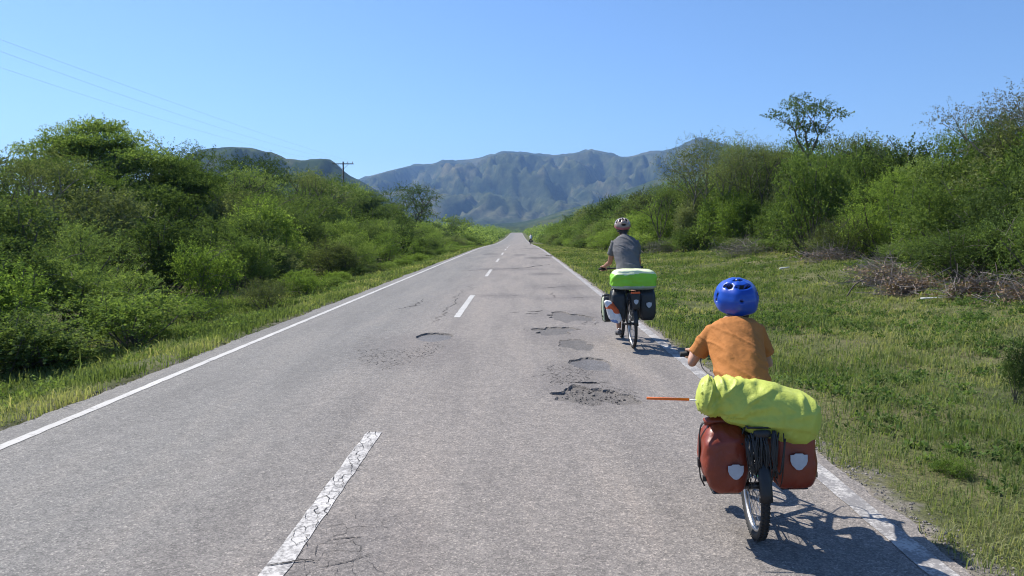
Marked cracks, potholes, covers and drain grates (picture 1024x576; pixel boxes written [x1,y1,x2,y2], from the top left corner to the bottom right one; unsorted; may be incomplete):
pothole [568,357,613,371]
pothole [549,384,643,406]
pothole [416,333,453,342]
crack [359,343,444,370]
pothole [531,327,581,336]
pothole [547,311,596,323]
crack [541,347,638,397]
pothole [558,339,595,351]
